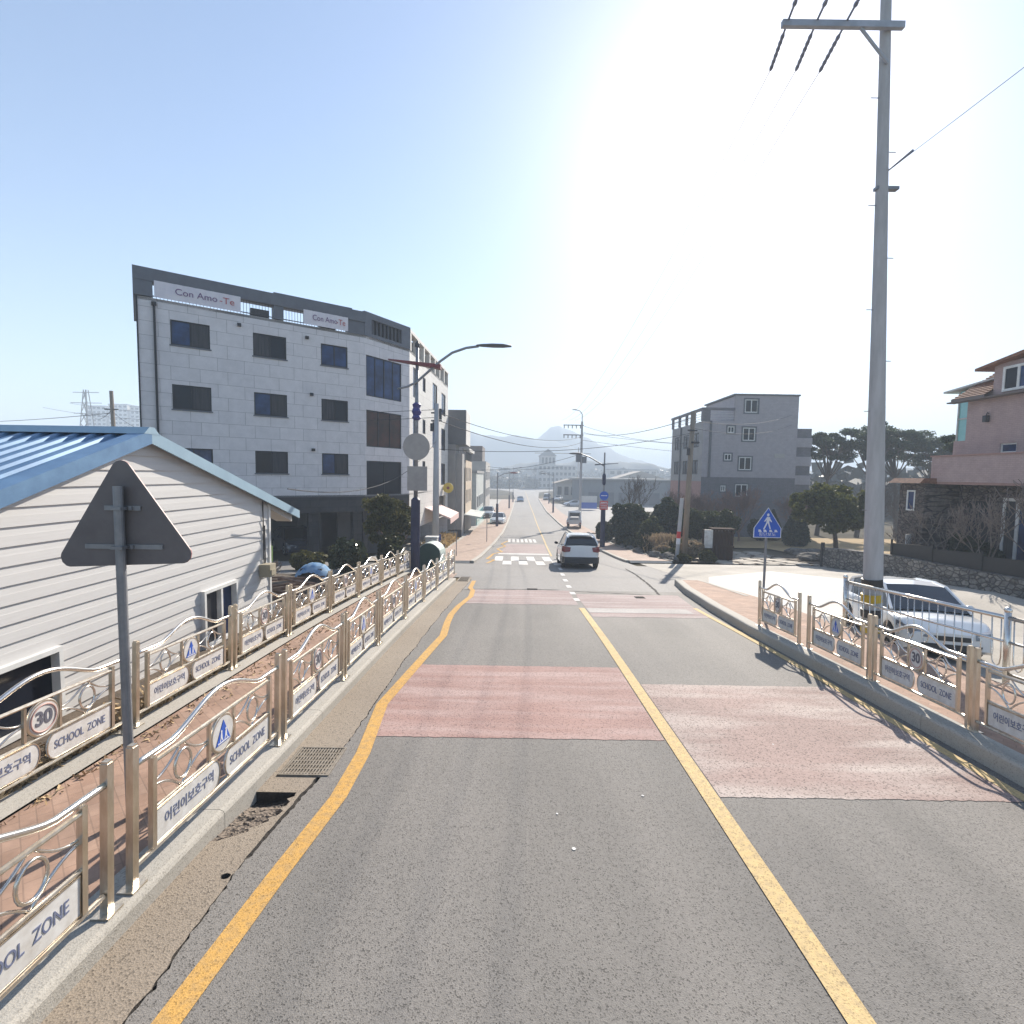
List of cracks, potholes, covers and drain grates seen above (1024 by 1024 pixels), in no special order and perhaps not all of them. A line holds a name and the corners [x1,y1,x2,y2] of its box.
pothole [212,792,297,841]
drain grate [276,747,347,780]
